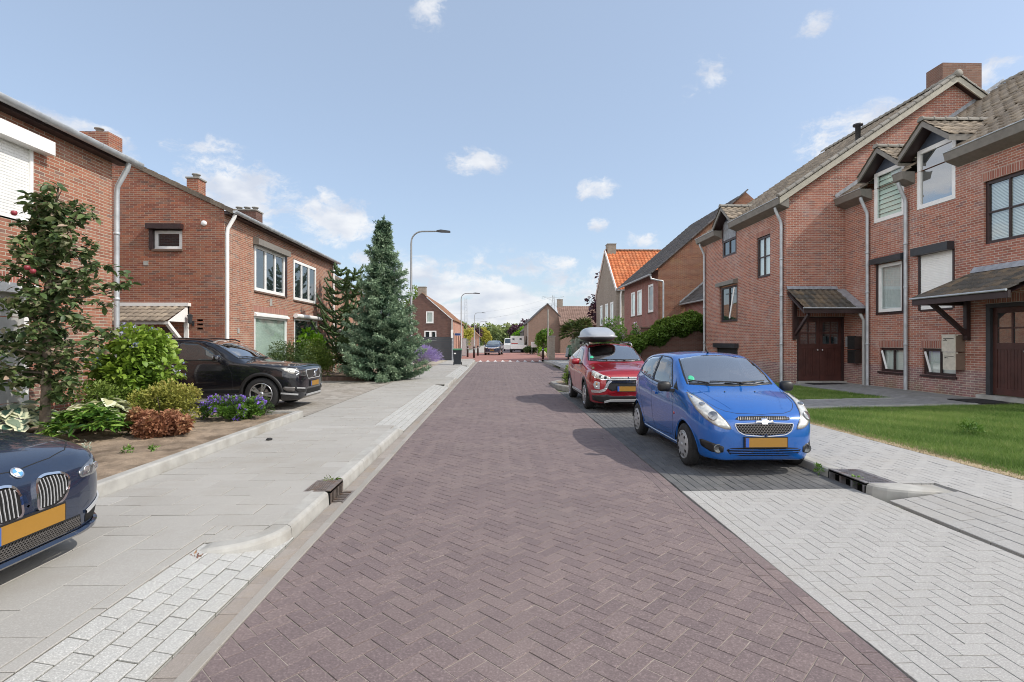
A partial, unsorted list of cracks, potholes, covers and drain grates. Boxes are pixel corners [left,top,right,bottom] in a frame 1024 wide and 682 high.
drain grate [303,479,355,505]
drain grate [828,468,896,493]
